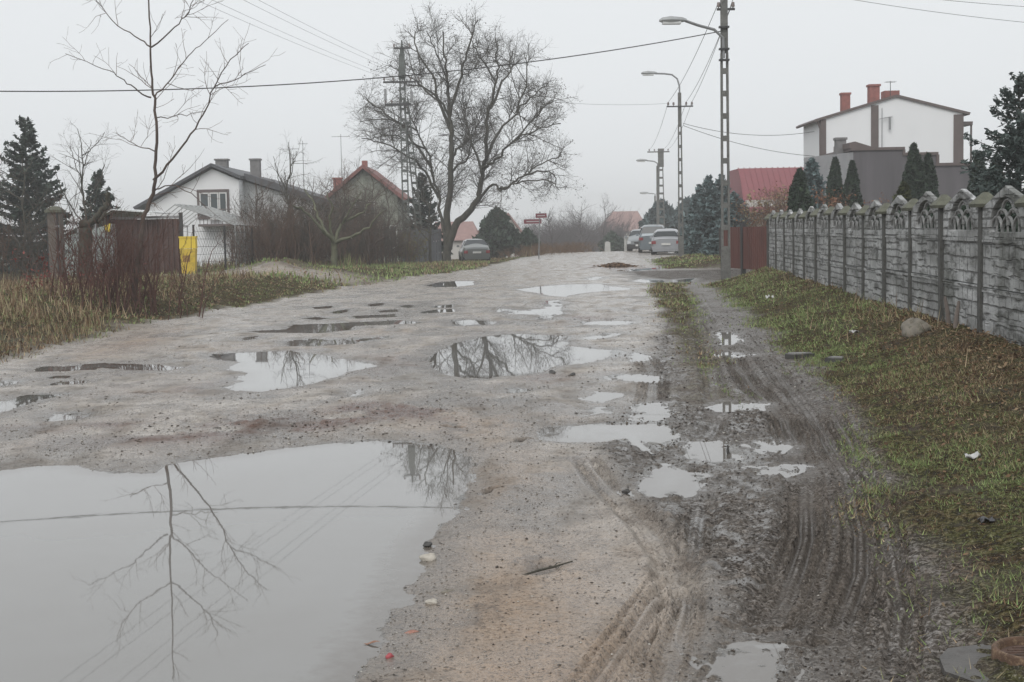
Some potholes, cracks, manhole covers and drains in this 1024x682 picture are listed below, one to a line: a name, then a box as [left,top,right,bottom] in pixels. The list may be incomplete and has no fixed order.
pothole [0,388,87,416]
pothole [511,283,636,297]
pothole [23,360,200,372]
pothole [0,433,496,682]
pothole [197,349,396,392]
pothole [516,417,706,455]
pothole [610,459,731,504]
pothole [489,299,573,320]
pothole [413,332,636,380]
pothole [238,319,433,333]
